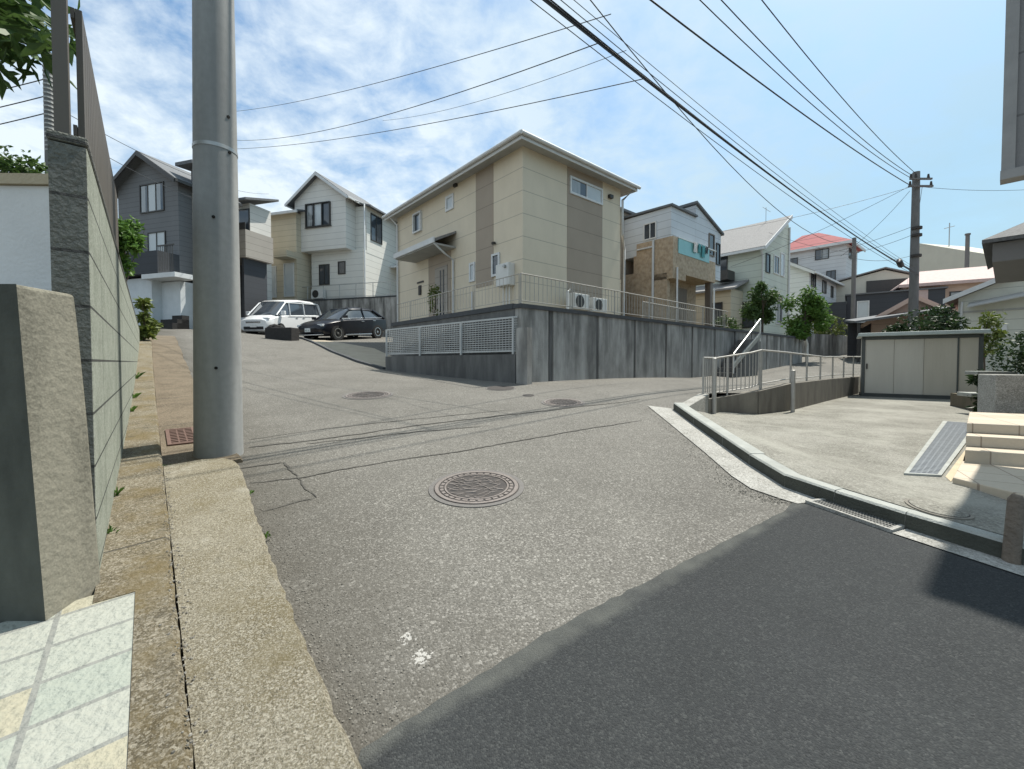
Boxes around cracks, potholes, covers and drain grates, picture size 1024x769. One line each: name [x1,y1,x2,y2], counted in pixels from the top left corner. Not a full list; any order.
manhole cover [541,398,586,407]
drain grate [165,427,193,446]
manhole cover [342,391,393,400]
drain grate [805,498,906,533]
manhole cover [905,499,975,520]
crack [242,399,641,511]
manhole cover [429,470,524,508]
